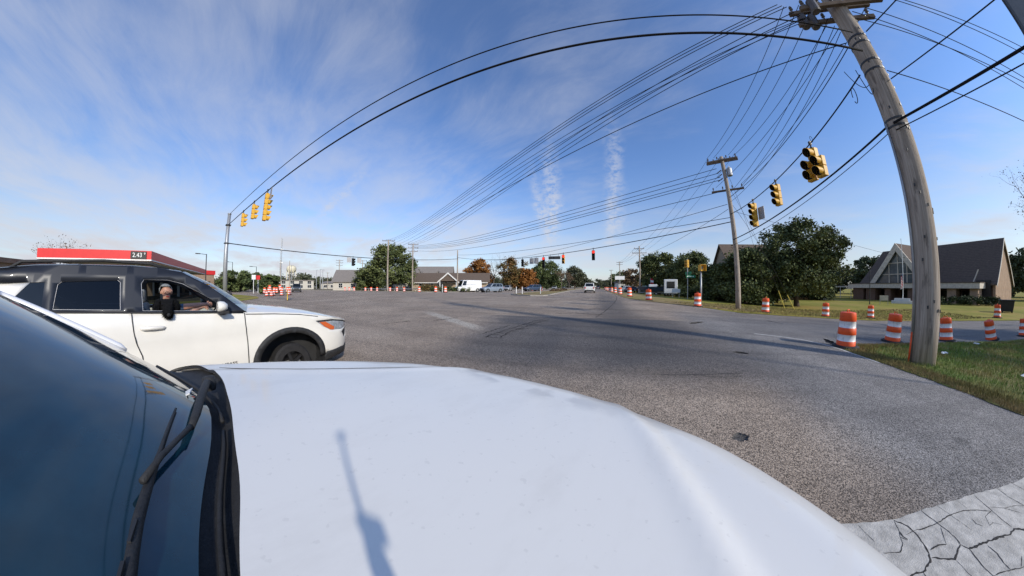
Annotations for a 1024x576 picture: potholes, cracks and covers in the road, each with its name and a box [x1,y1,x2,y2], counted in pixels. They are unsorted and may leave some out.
pothole [731,432,750,442]
